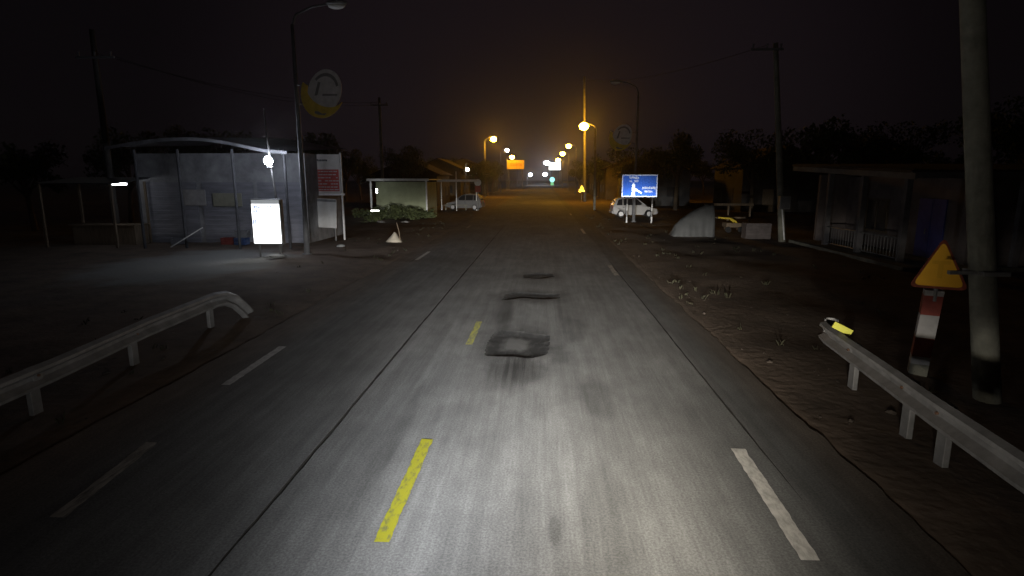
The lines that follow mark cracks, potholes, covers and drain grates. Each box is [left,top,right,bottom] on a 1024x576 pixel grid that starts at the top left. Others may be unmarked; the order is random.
pothole [502,292,560,300]
pothole [484,330,550,359]
